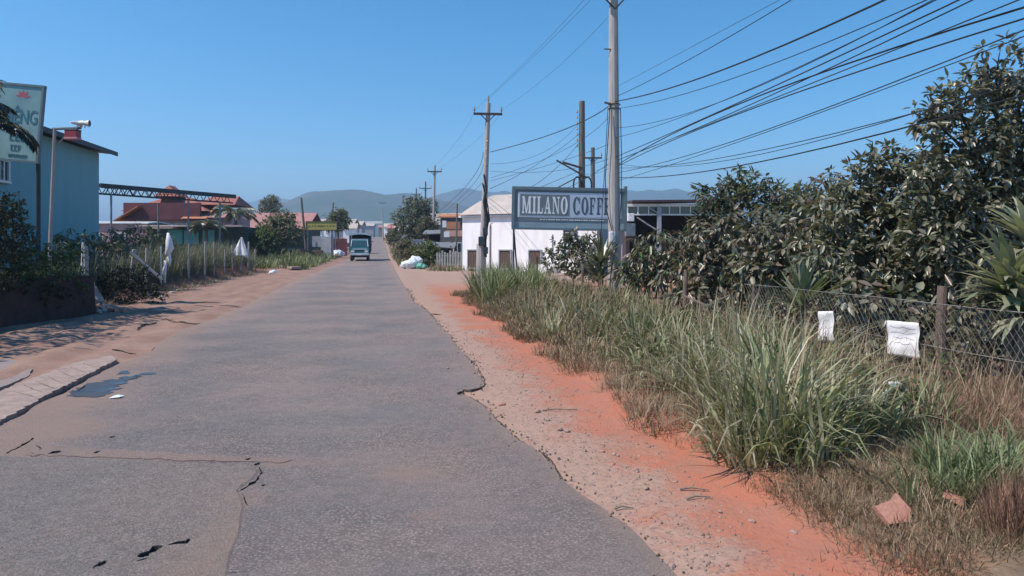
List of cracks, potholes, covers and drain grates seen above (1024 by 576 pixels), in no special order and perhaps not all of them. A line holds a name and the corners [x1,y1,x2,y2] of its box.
crack [240,467,263,506]
crack [138,540,190,557]
crack [137,318,200,350]
crack [465,357,525,443]
